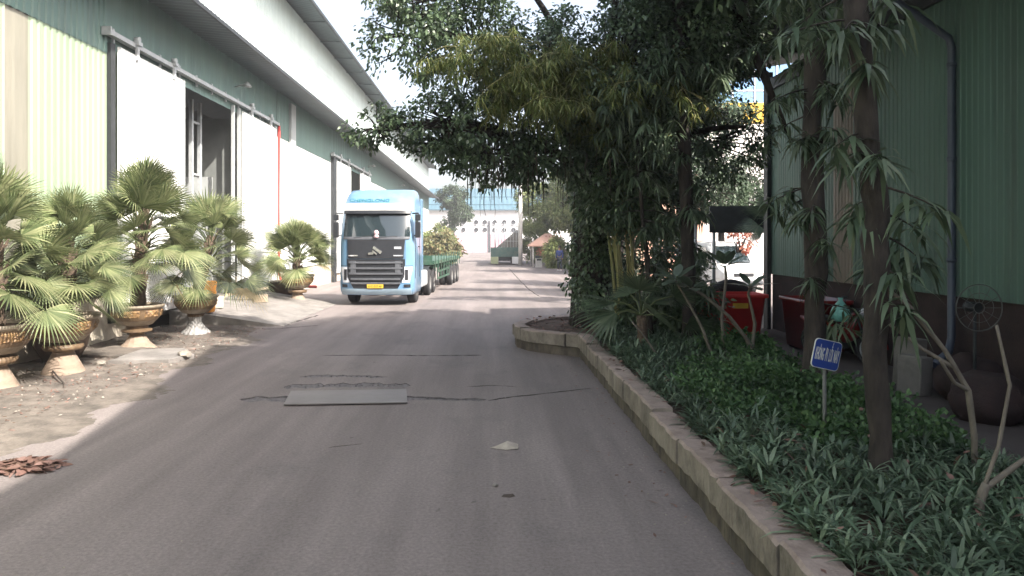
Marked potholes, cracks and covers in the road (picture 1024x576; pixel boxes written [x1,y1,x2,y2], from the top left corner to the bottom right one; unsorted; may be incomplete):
crack [240,375,590,402]
